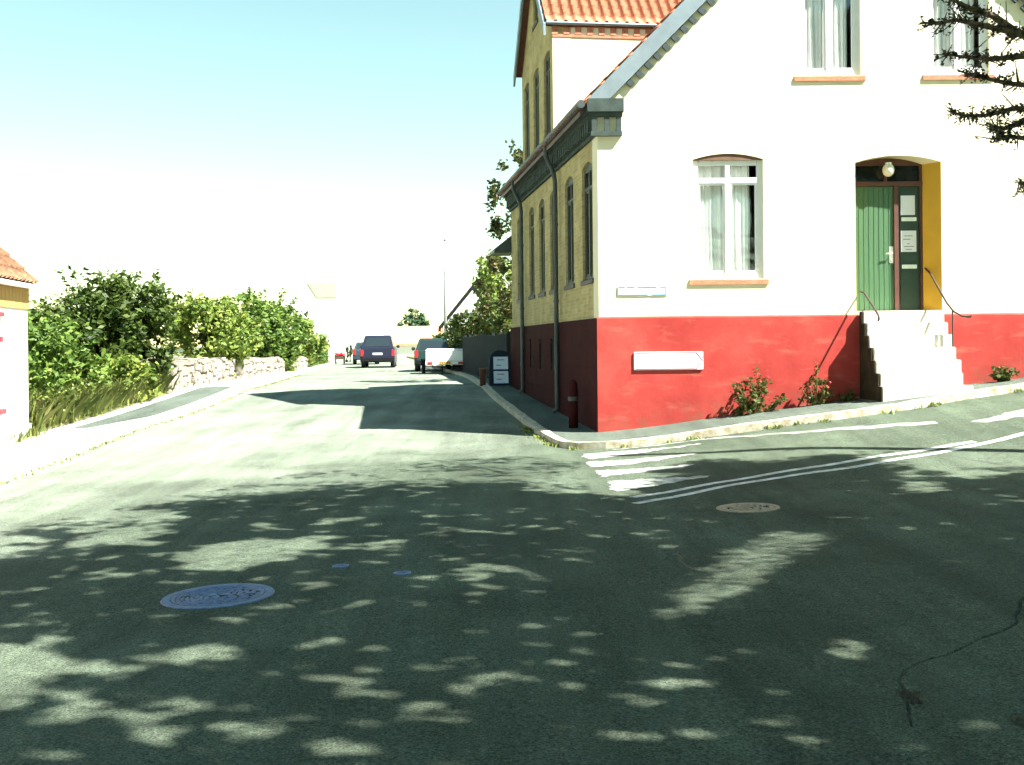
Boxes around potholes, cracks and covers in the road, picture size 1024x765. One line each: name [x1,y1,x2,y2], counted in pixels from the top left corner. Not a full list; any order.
crack [899,620,1018,727]
manhole cover [716,503,780,513]
manhole cover [160,583,275,609]
